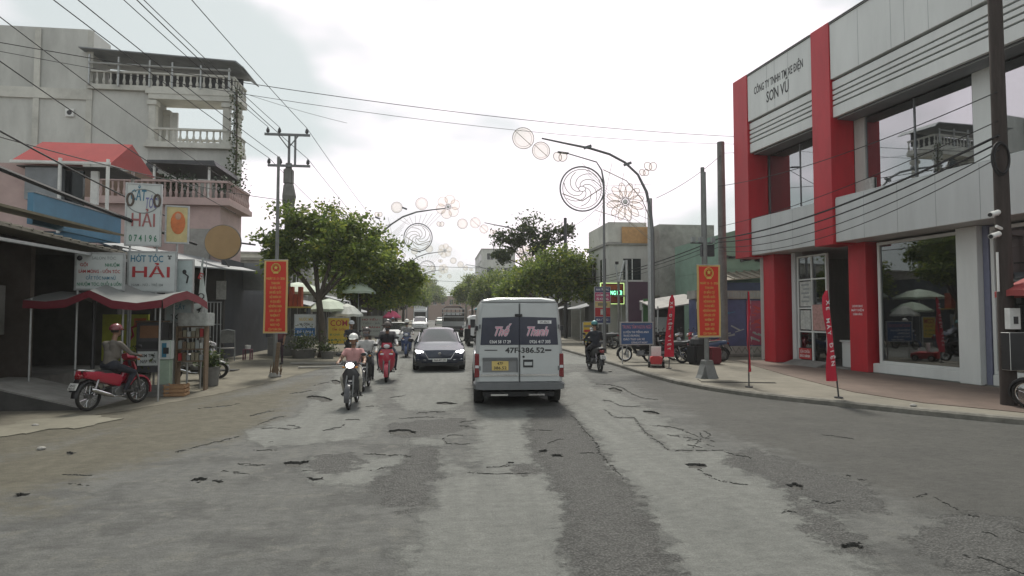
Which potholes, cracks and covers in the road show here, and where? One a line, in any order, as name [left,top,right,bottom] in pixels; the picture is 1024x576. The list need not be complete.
pothole [841,542,865,550]
crack [176,436,239,453]
crack [697,469,748,485]
crack [198,403,299,474]
crack [533,384,752,479]
